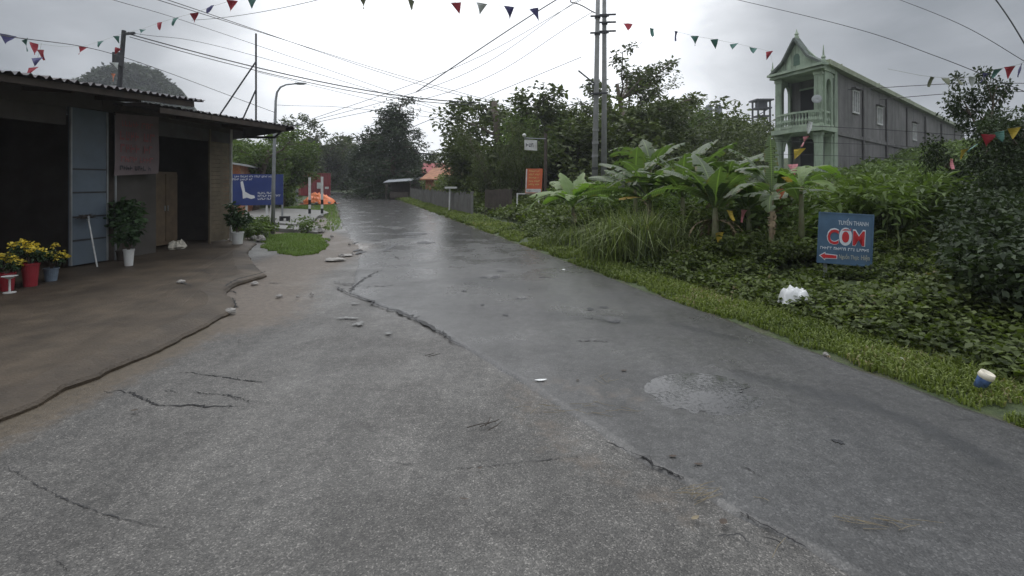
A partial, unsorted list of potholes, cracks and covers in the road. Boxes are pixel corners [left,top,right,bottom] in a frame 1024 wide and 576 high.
crack [714,512,807,549]
crack [606,441,684,479]
crack [336,255,462,345]
crack [106,372,261,407]
crack [9,468,168,528]
crack [458,456,578,468]
